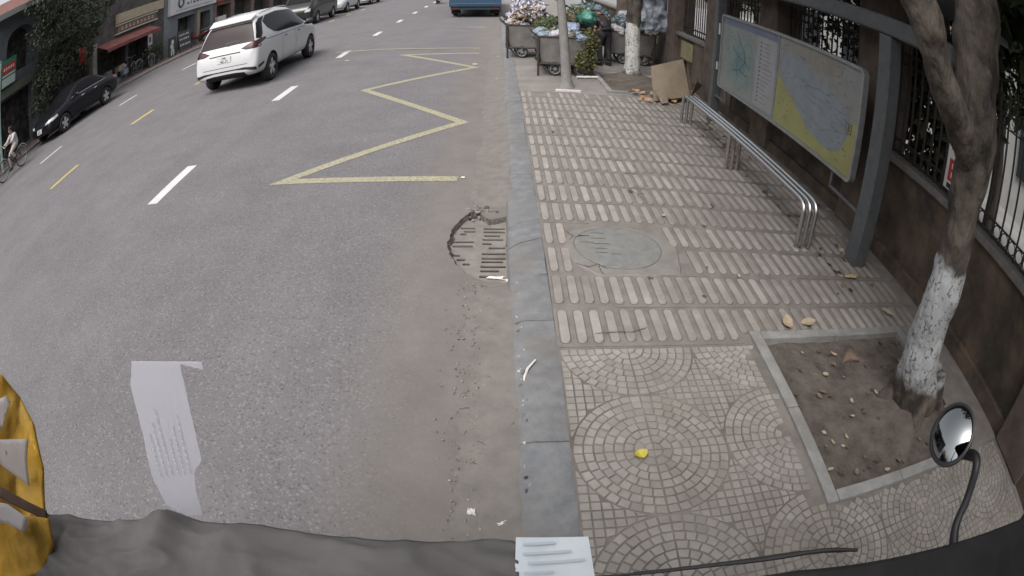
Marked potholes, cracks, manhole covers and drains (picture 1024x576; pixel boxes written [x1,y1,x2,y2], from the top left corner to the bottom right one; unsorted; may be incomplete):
drain grate [451,221,507,284]
manhole cover [565,227,681,277]
